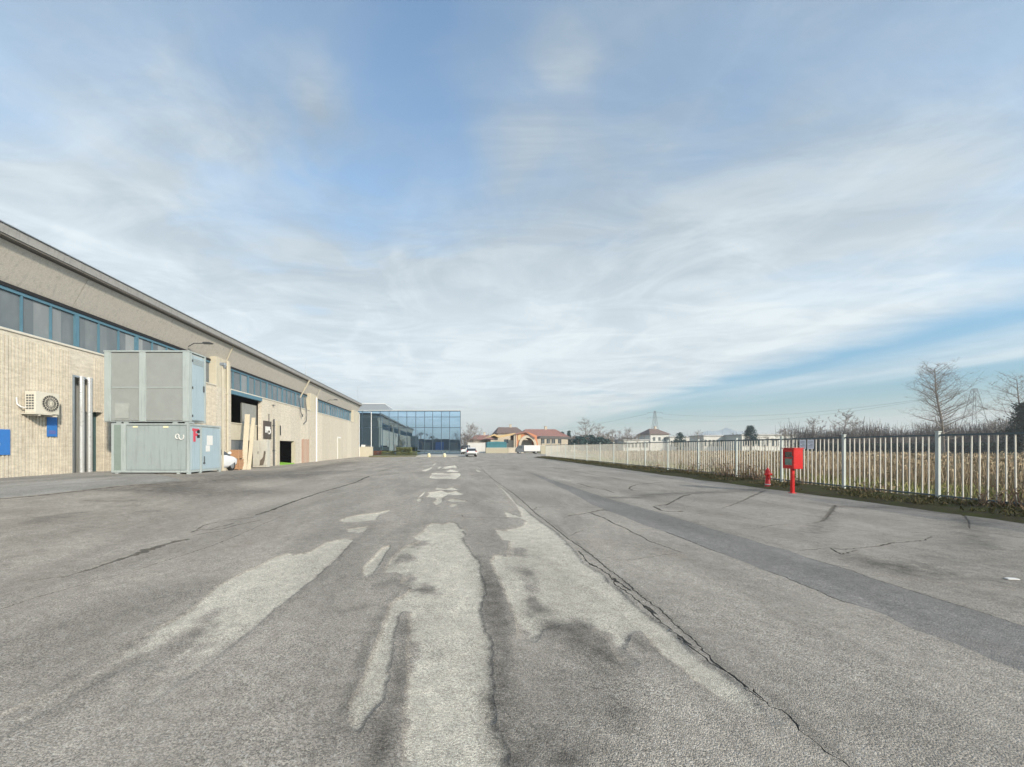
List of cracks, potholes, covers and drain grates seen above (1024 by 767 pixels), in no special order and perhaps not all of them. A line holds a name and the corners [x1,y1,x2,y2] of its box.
crack [803,537,1022,626]
crack [478,465,856,767]
crack [1,467,402,609]
